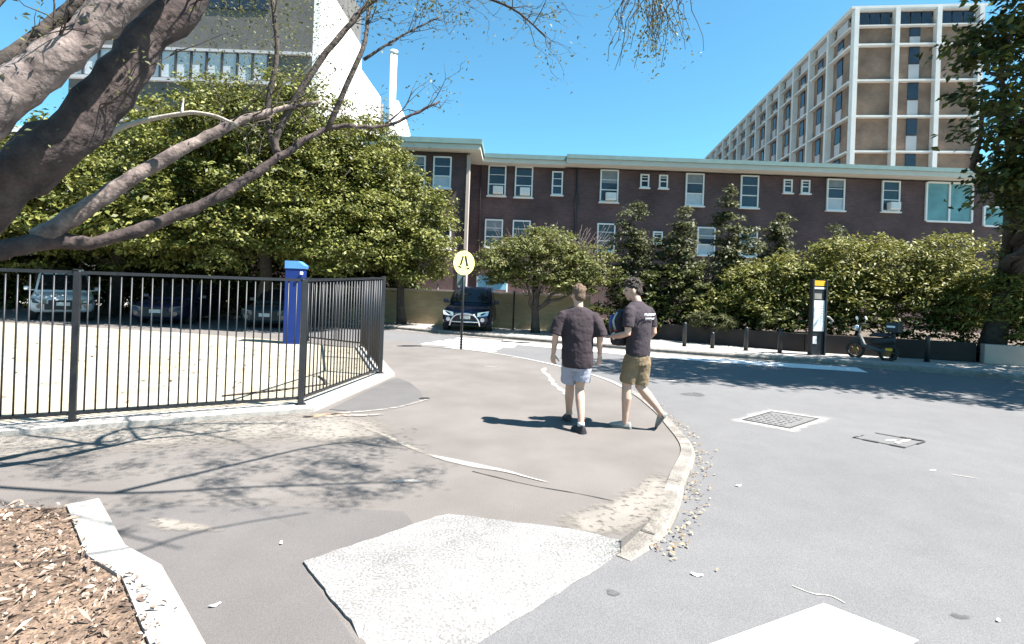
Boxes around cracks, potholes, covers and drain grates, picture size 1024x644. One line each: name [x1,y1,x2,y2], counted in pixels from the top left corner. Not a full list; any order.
manhole cover [853,432,926,447]
